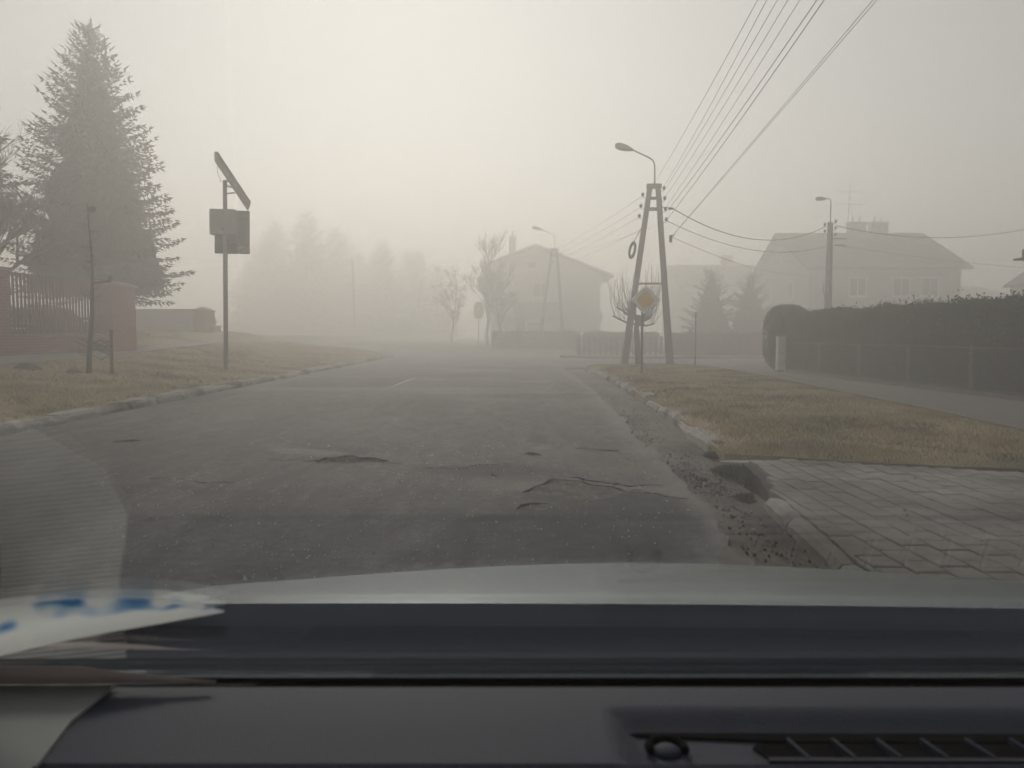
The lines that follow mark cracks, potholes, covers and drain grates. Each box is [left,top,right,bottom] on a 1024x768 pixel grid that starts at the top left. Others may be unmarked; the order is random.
pothole [516,503,552,511]
crack [556,476,686,499]
pothole [308,455,388,464]
